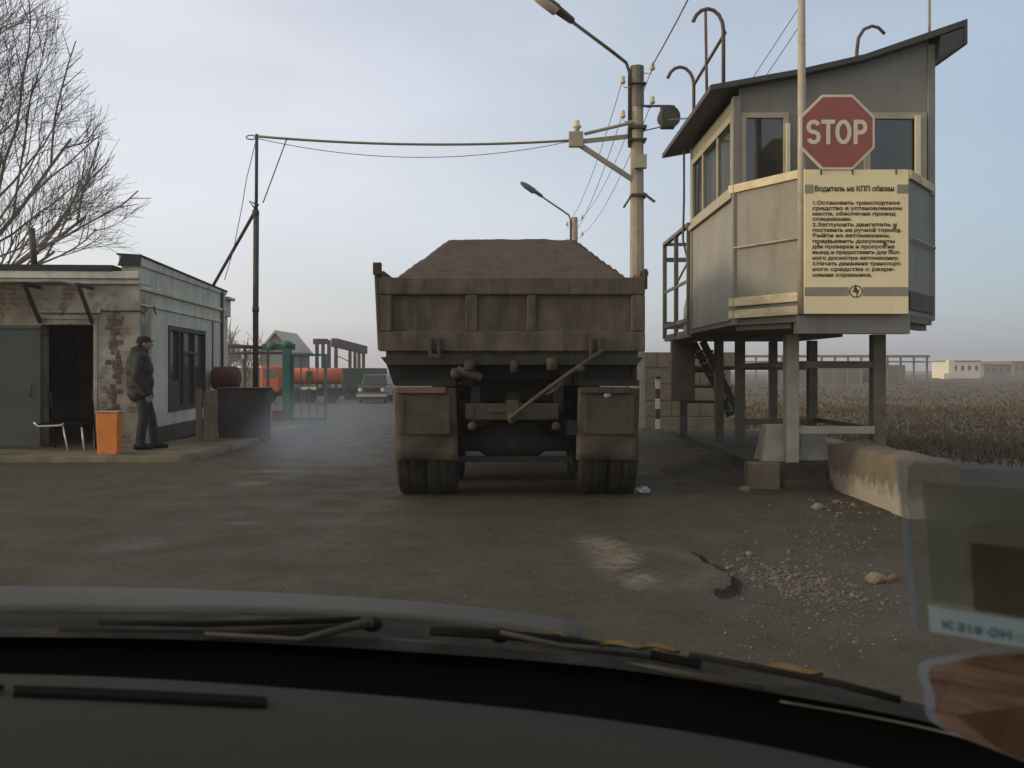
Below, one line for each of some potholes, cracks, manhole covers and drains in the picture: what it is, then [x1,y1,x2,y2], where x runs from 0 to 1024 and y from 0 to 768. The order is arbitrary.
crack [689,552,731,571]
pothole [710,574,748,601]
